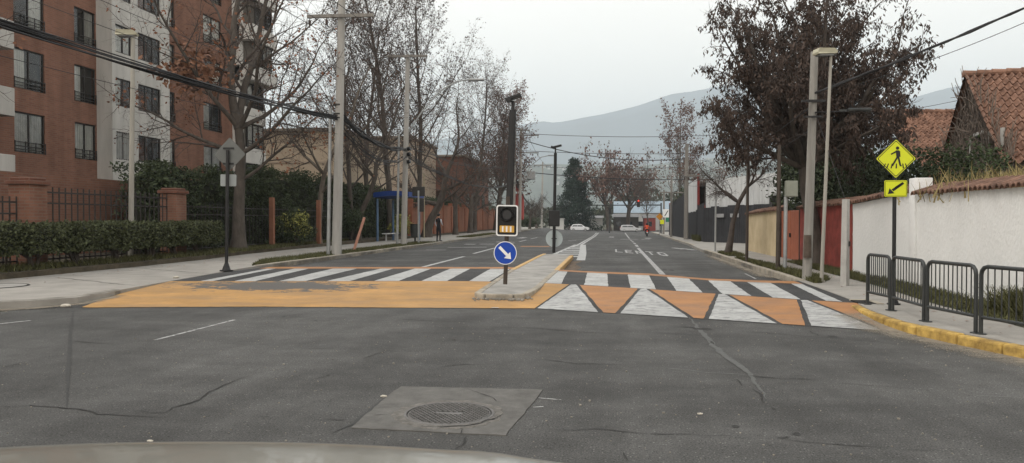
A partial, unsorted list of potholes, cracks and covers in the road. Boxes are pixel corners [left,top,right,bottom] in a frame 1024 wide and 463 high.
manhole cover [351,386,543,436]
crack [3,374,254,418]
